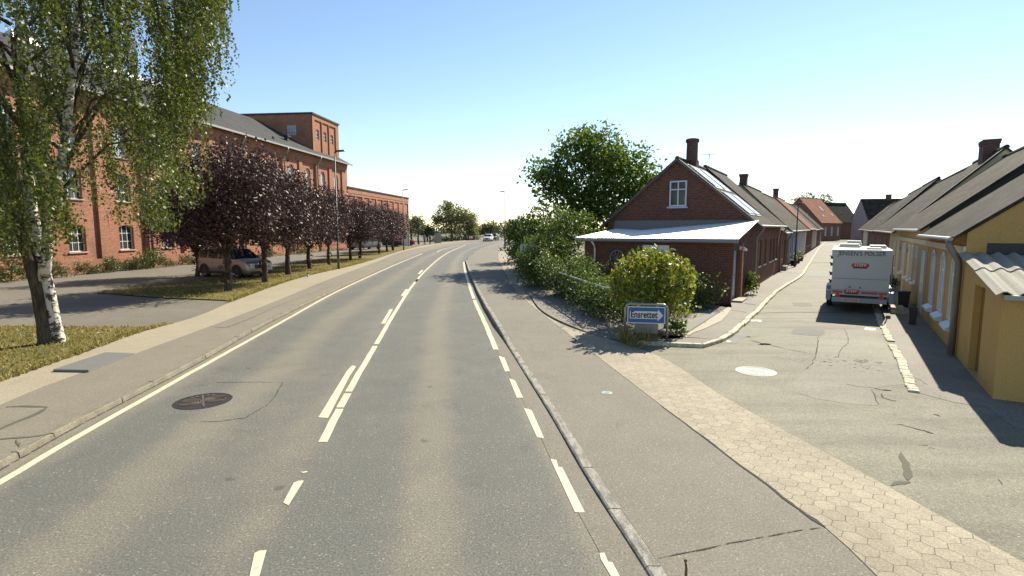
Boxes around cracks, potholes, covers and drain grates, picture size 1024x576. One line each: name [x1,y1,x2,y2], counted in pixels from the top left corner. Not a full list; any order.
manhole cover [172,393,233,410]
manhole cover [735,366,777,376]
crack [848,384,947,449]
manhole cover [53,352,134,372]
